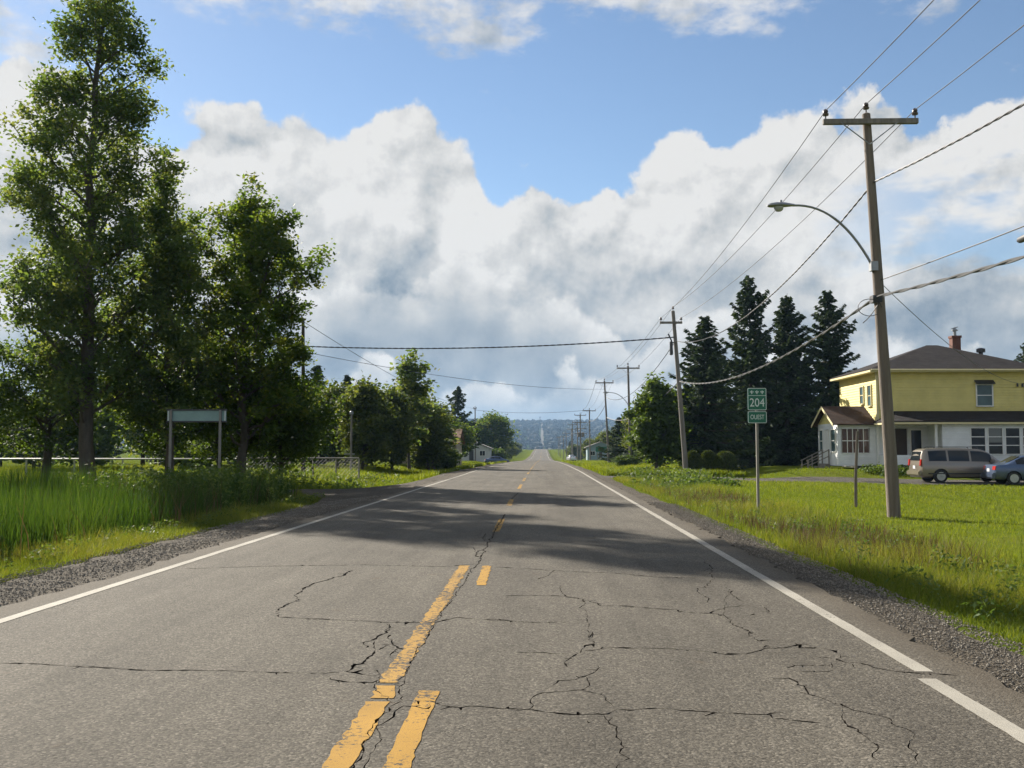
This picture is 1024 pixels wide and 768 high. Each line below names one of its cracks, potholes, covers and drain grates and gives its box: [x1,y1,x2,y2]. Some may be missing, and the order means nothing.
crack [7,493,958,768]
